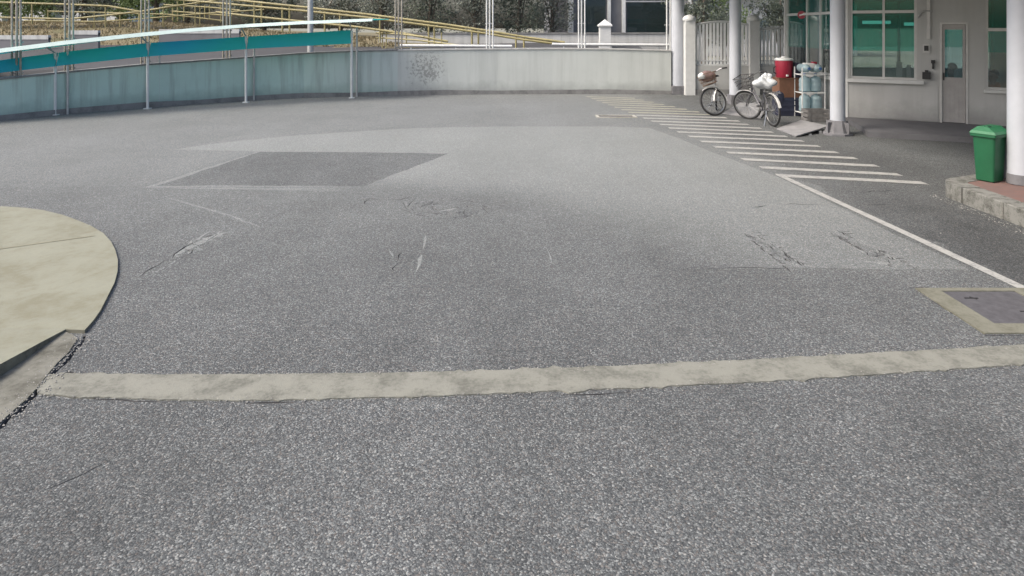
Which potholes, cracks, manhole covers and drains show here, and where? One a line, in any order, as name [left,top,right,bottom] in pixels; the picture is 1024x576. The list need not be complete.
crack [745,234,808,272]
crack [837,230,920,270]
manhole cover [915,288,1024,335]
crack [138,235,216,277]
crack [363,197,489,218]
